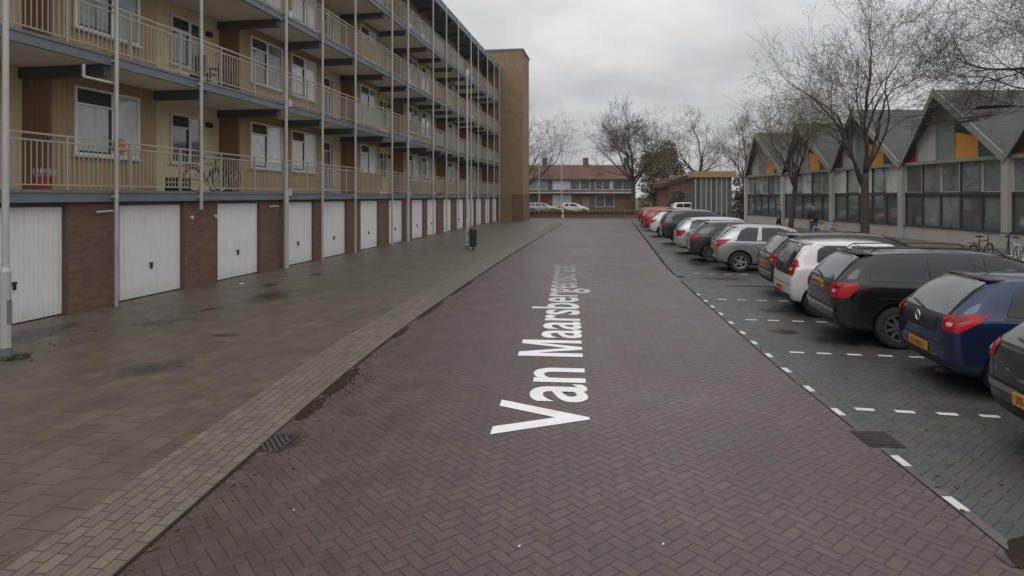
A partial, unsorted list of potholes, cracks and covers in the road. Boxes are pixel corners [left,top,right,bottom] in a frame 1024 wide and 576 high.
drain grate [255,434,299,453]
